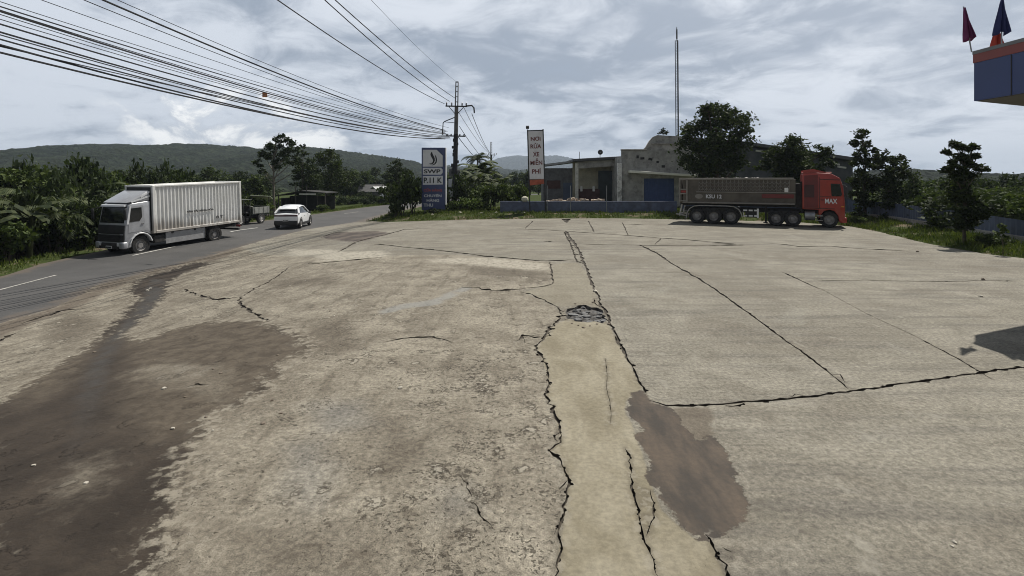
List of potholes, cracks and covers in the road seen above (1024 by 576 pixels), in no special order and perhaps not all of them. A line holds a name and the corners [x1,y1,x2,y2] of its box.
crack [705,534,738,576]
pothole [566,305,607,323]
crack [625,449,658,576]
crack [313,228,580,576]
crack [185,268,287,321]
